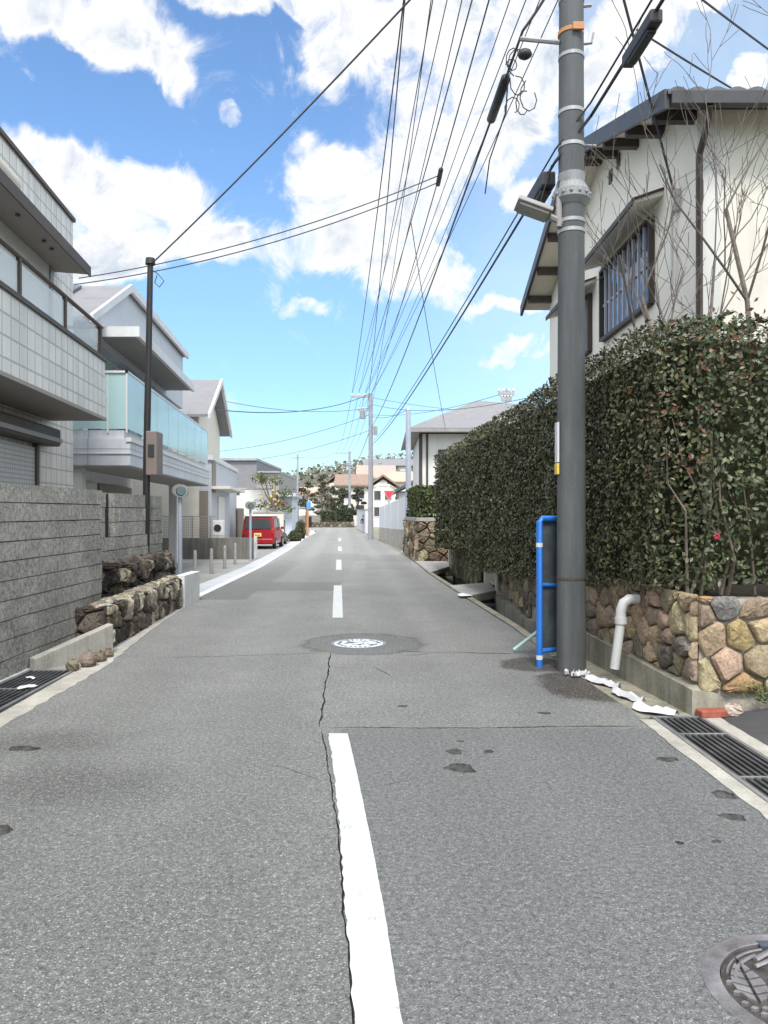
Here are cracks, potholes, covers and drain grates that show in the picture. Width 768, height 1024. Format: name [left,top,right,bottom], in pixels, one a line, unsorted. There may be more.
drain grate [651,716,768,803]
manhole cover [331,639,386,648]
manhole cover [701,934,768,1024]
drain grate [0,669,73,713]
crack [269,654,637,1024]
